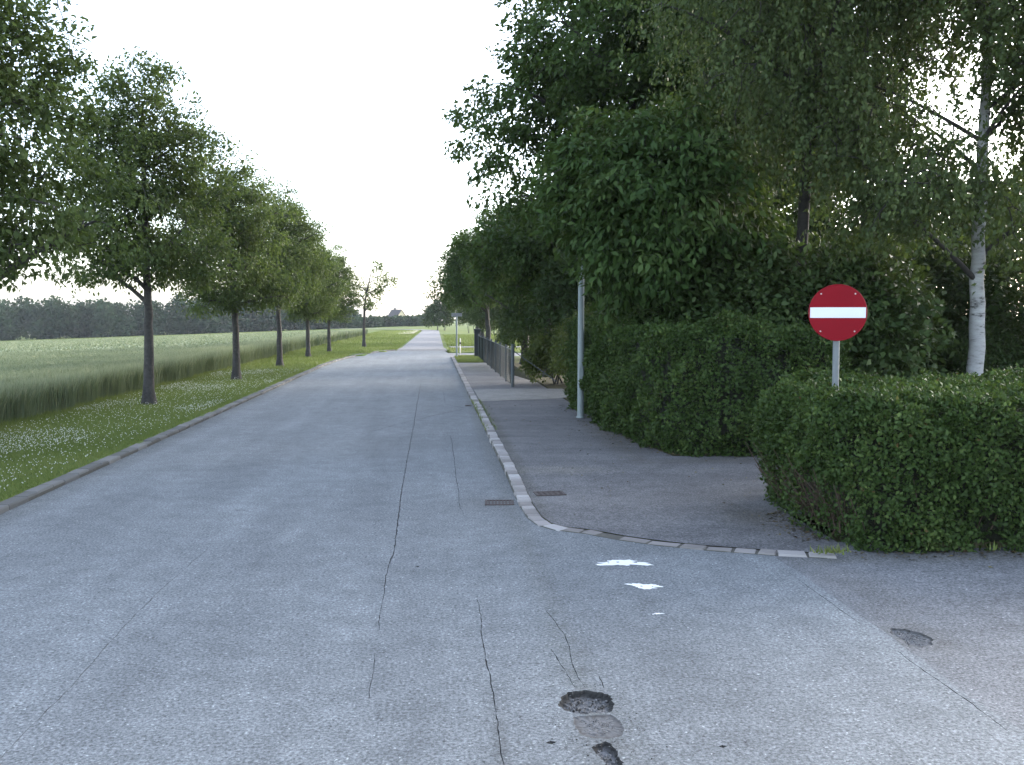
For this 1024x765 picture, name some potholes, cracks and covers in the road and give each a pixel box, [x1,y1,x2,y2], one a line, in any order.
crack [545,609,604,688]
pothole [558,690,614,714]
crack [477,596,504,764]
pothole [890,628,934,648]
pothole [592,741,624,765]
